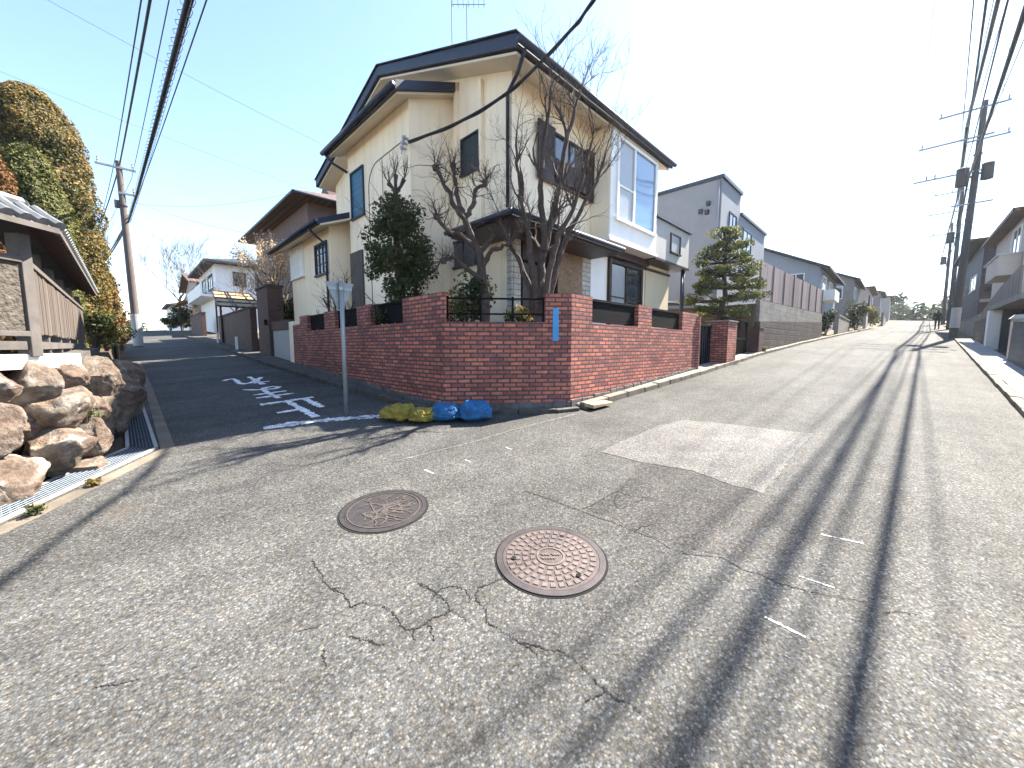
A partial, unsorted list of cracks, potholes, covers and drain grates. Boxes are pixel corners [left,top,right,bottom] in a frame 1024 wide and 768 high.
manhole cover [495,526,608,599]
manhole cover [337,490,429,534]
crack [312,560,360,608]
crack [349,578,641,712]
